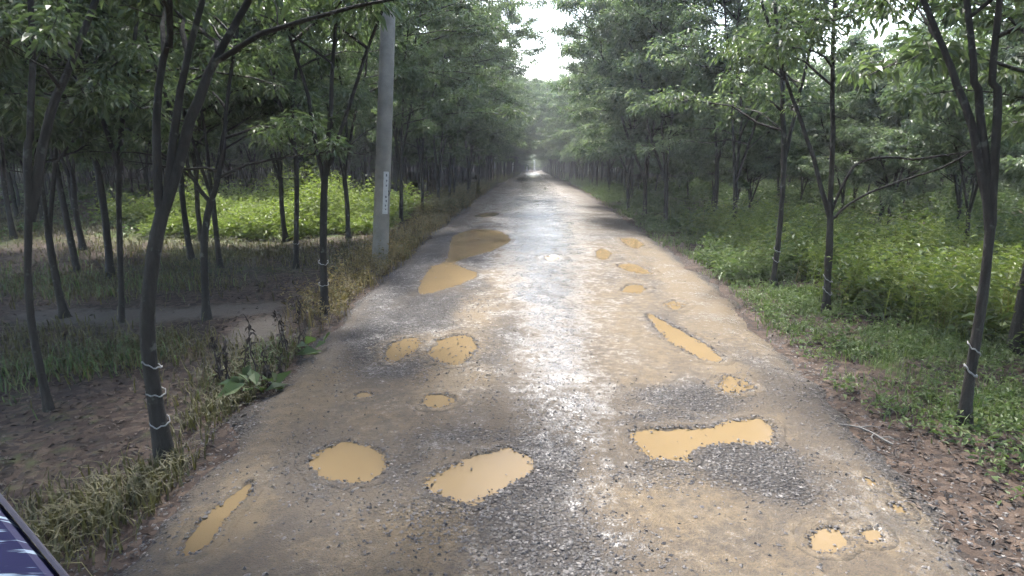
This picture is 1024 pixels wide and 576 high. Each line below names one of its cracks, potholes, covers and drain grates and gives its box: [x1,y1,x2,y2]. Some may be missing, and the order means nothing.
pothole [619,412,789,468]
pothole [417,332,489,369]
pothole [409,441,548,512]
pothole [293,435,401,490]
pothole [610,281,657,296]
pothole [372,334,438,366]
pothole [344,388,384,402]
pothole [704,371,768,399]
pothole [653,297,697,312]
pothole [608,261,663,276]
pothole [637,311,737,366]
pothole [410,389,468,413]
